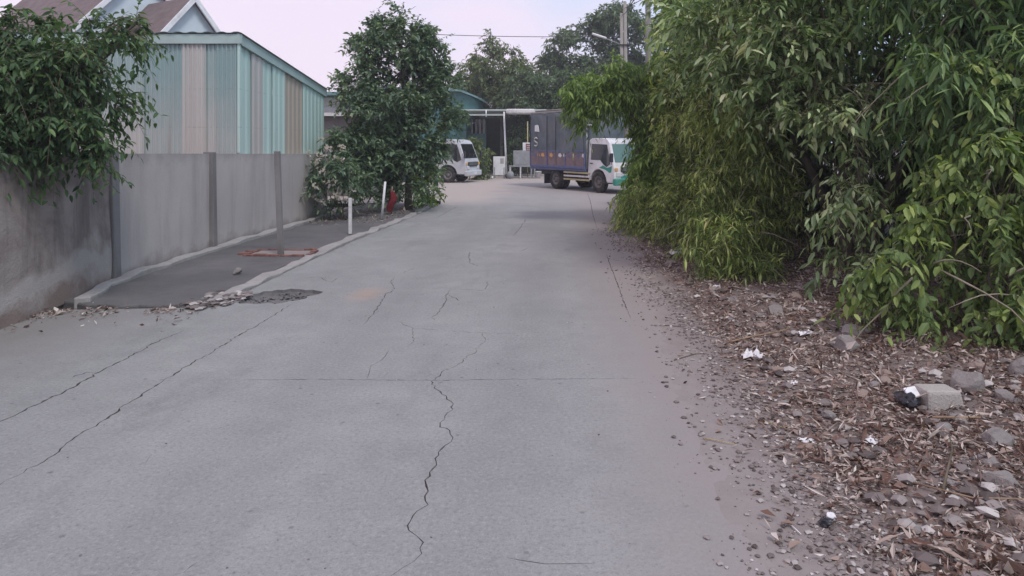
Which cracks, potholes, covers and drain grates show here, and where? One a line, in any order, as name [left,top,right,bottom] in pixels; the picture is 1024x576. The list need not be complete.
crack [391,286,516,576]
pothole [238,289,322,304]
crack [1,306,288,484]
